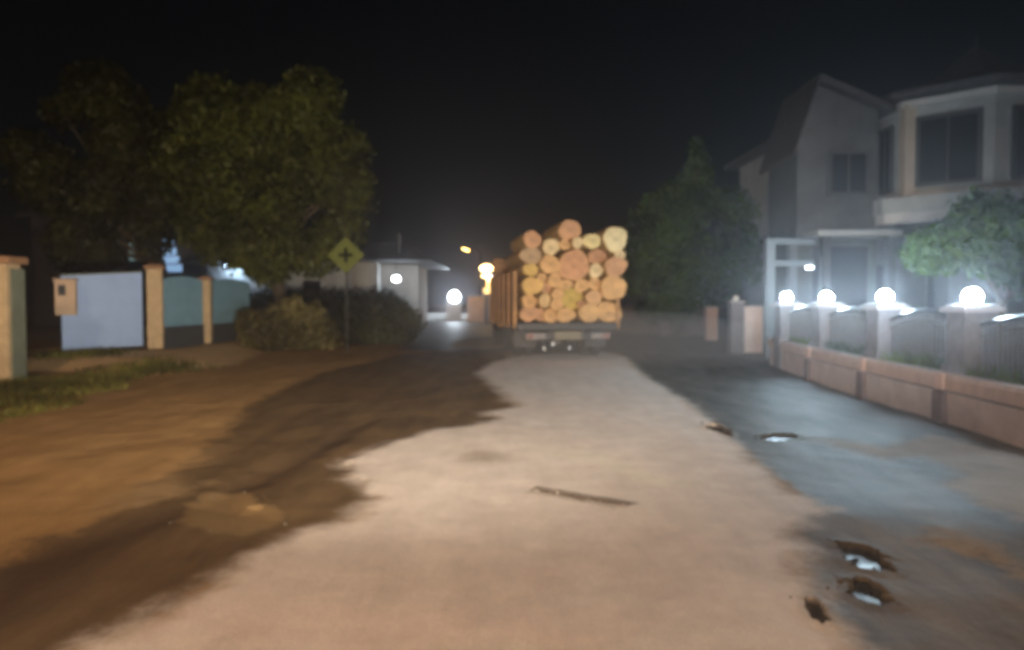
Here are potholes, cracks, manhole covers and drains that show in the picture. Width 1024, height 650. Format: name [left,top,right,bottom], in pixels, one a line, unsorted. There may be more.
pothole [167,491,292,539]
pothole [696,421,741,439]
pothole [825,537,911,583]
crack [523,486,640,509]
pothole [752,433,806,444]
pothole [826,572,913,616]
